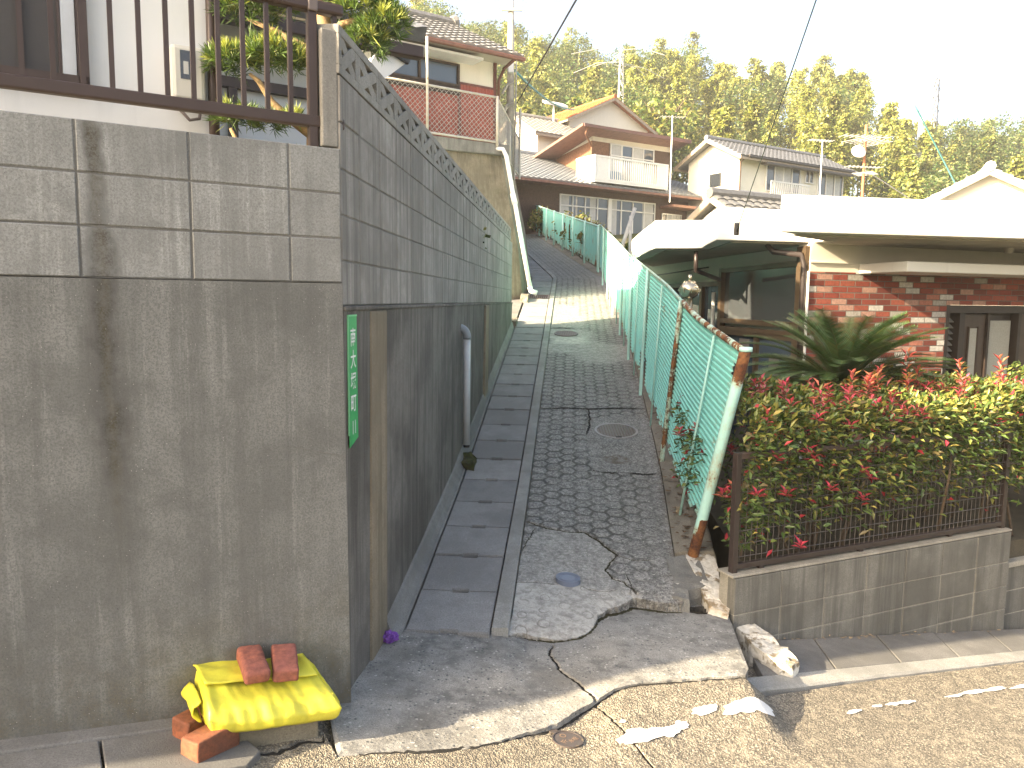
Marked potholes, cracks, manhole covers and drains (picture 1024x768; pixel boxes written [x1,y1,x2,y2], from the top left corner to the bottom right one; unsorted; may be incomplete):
manhole cover [594,423,638,439]
crack [359,522,746,768]
manhole cover [556,572,580,587]
utility cover [549,729,584,749]
crack [547,407,645,432]
